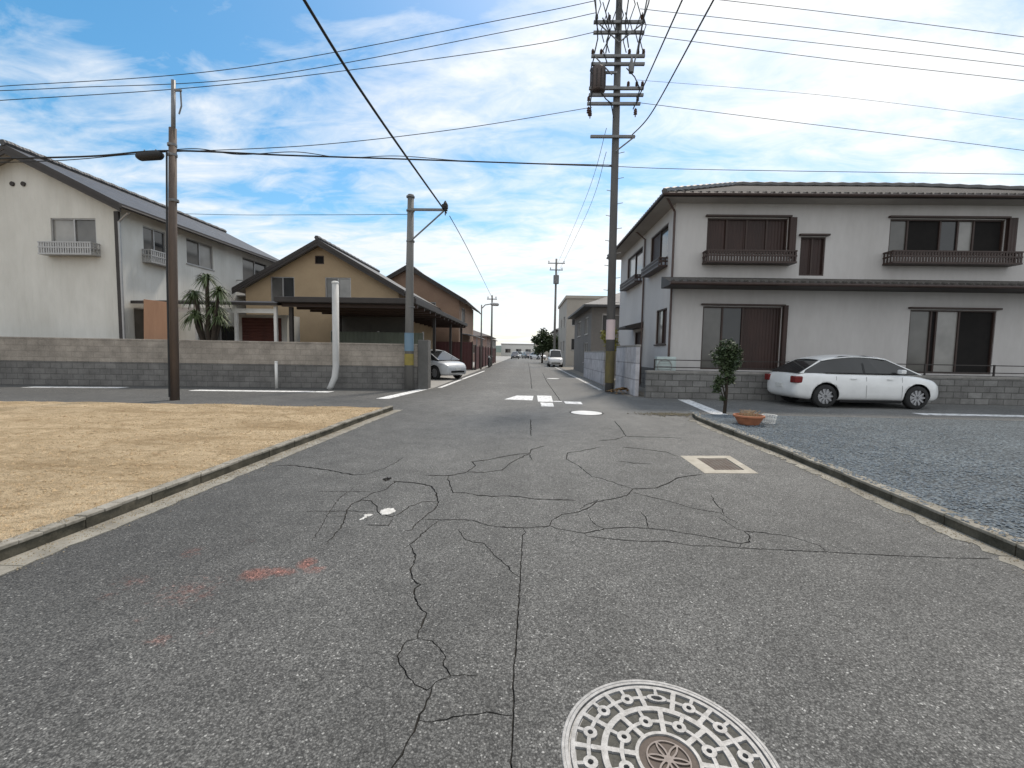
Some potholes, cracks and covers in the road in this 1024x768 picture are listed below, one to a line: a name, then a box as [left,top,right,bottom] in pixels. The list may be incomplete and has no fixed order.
manhole cover [561,679,780,768]
crack [278,422,992,768]
